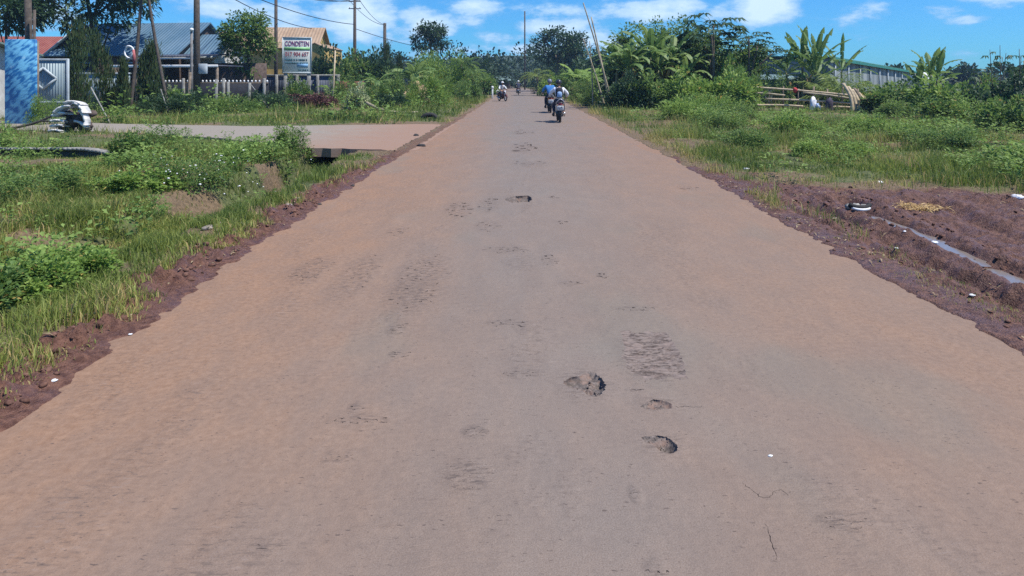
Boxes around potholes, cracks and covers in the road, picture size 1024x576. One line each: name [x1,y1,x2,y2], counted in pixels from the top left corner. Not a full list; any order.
pothole [640,399,672,410]
pothole [564,371,606,397]
pothole [642,435,678,454]
